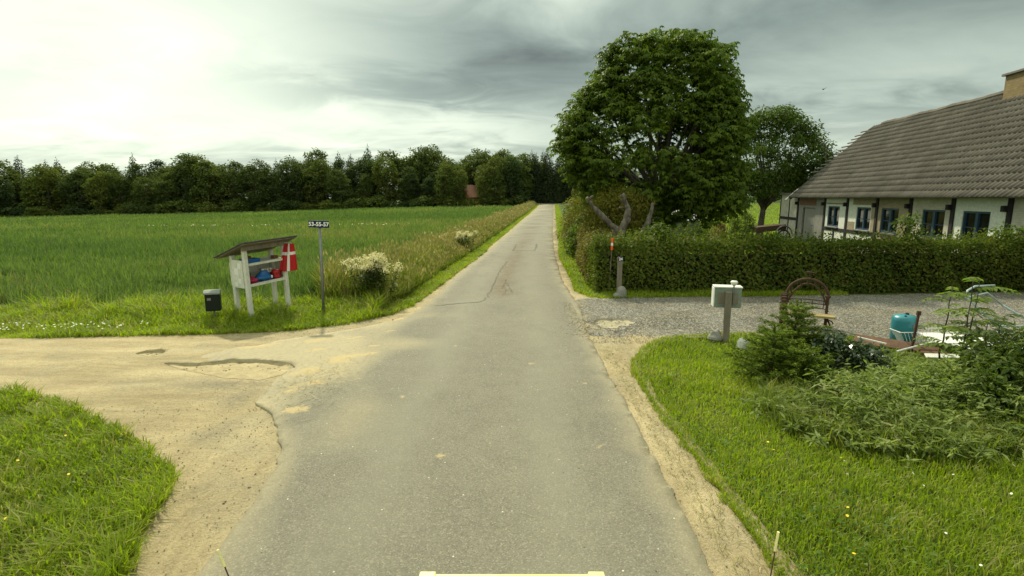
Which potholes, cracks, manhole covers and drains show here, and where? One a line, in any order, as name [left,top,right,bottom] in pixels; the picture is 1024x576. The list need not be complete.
pothole [169,360,293,380]
